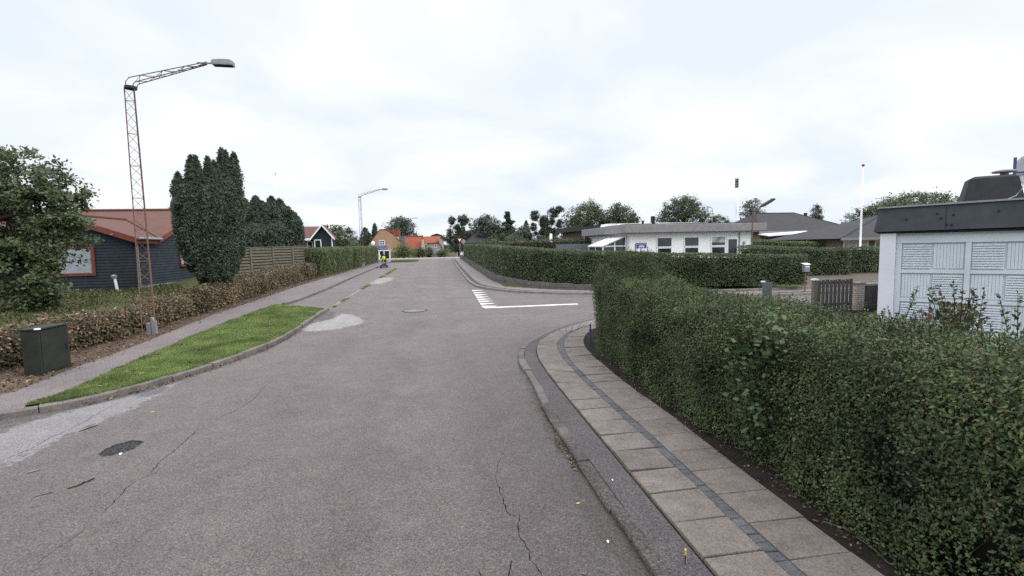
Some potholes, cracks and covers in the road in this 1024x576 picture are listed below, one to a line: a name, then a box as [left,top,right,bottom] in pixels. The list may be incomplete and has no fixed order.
crack [495,451,542,576]
crack [2,384,268,564]
